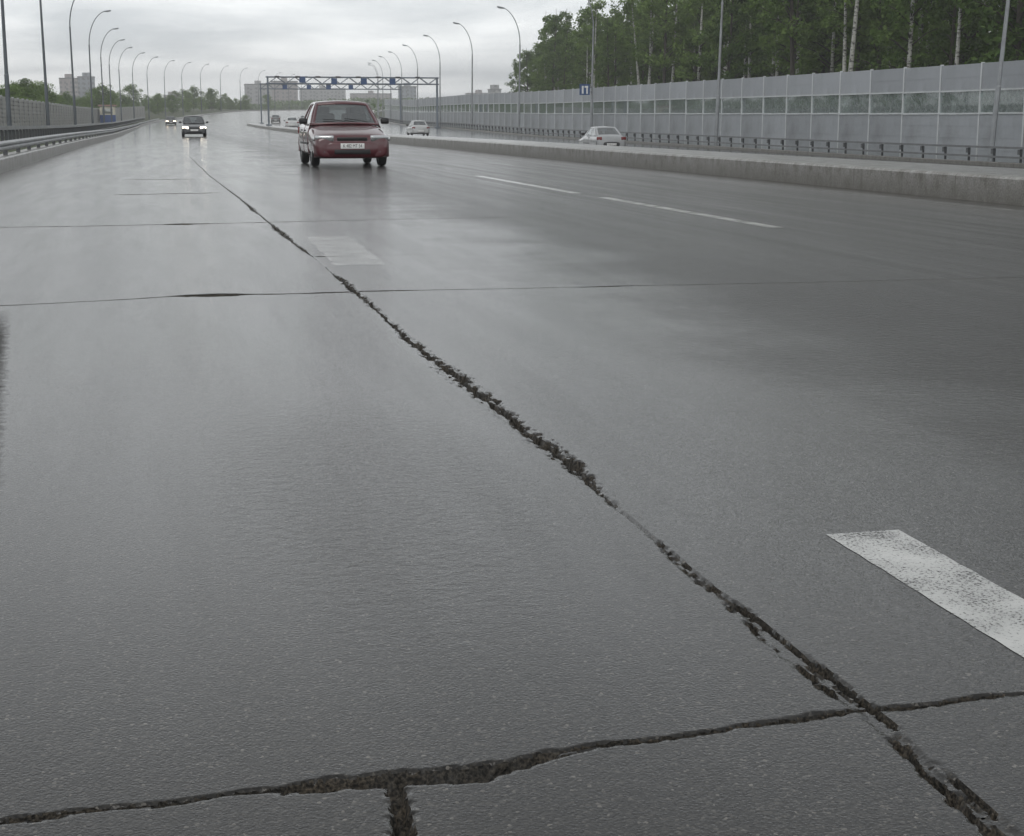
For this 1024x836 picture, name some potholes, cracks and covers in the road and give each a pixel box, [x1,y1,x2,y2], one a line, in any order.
crack [44,217,500,227]
crack [189,156,1006,836]
crack [0,694,1022,836]
crack [8,277,1021,306]
